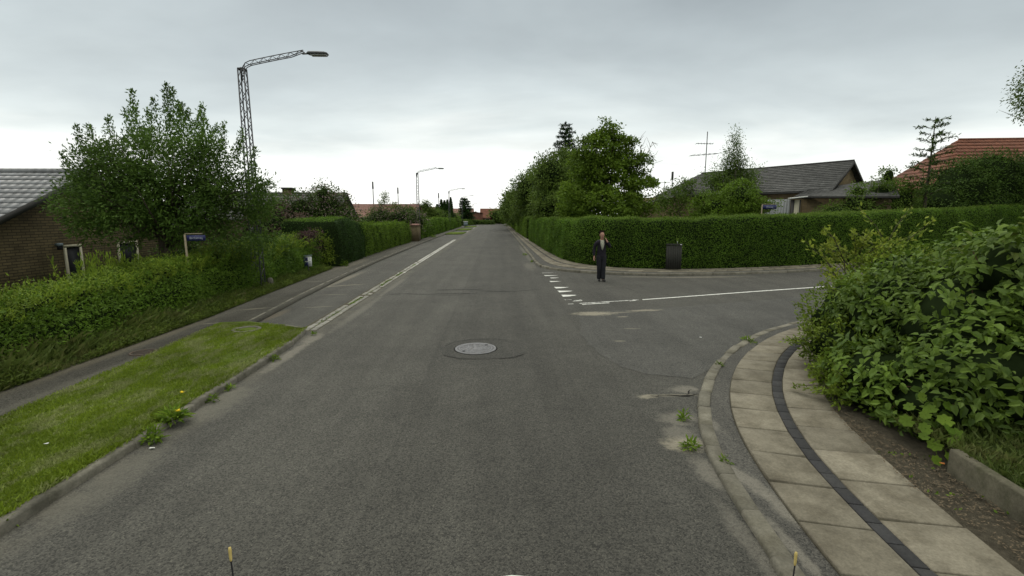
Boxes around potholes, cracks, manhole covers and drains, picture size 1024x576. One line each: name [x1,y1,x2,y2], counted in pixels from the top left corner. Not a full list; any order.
manhole cover [454,343,497,355]
